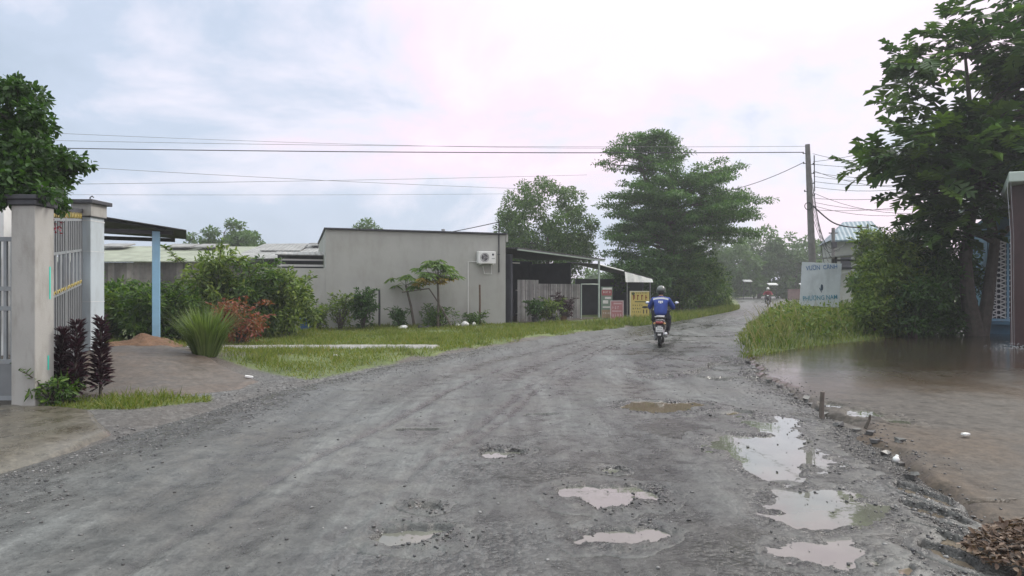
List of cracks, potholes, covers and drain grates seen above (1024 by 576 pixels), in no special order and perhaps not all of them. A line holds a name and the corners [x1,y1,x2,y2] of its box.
pothole [526,474,688,521]
pothole [733,478,947,548]
pothole [675,412,885,493]
pothole [394,497,457,517]
pothole [459,442,539,465]
pothole [599,398,736,418]
pothole [750,529,913,576]
pothole [332,516,478,562]
pothole [546,518,689,558]
pothole [591,465,635,476]
